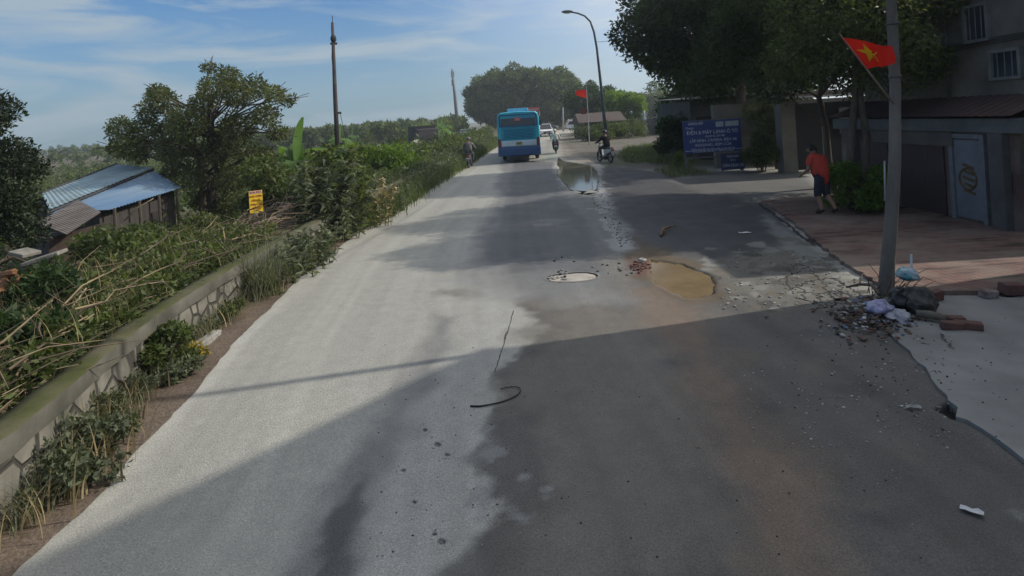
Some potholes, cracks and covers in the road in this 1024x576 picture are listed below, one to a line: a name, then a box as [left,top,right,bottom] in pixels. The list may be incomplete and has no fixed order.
pothole [639,257,728,304]
crack [779,256,870,310]
manhole cover [543,272,602,283]
pothole [550,157,604,194]
